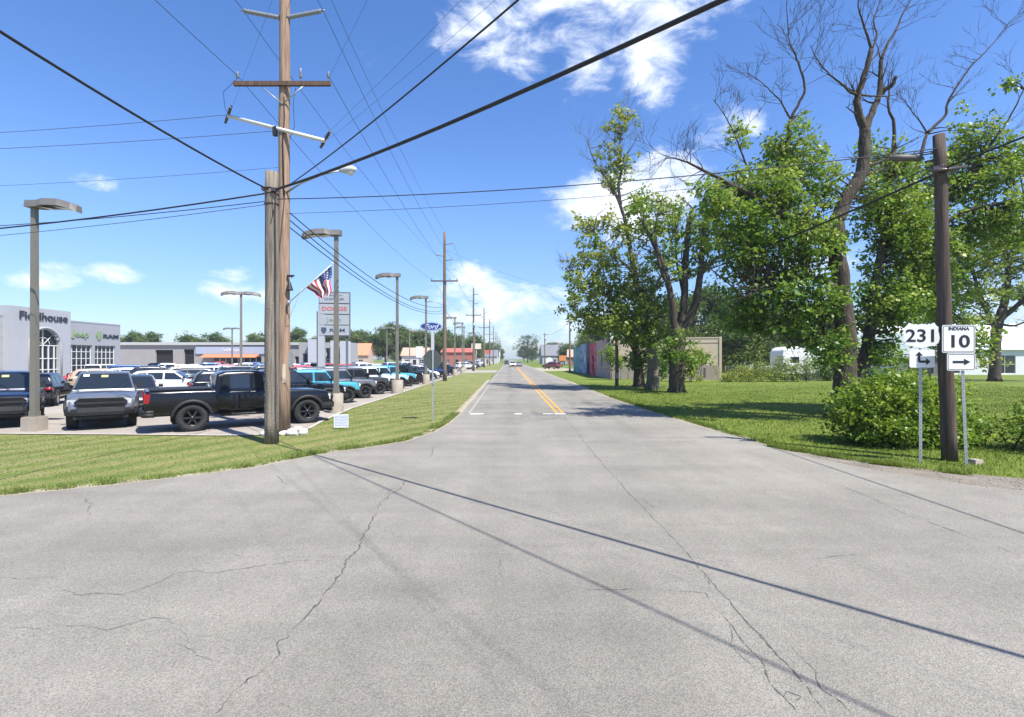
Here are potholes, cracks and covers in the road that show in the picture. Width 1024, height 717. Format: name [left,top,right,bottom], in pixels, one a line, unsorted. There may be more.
crack [38,480,407,713]
